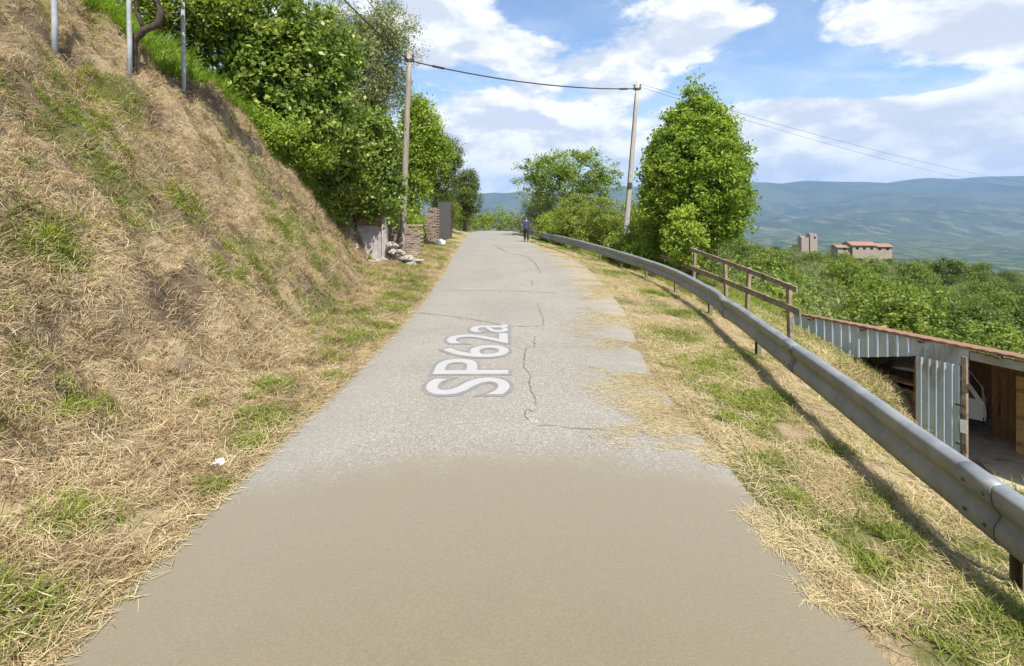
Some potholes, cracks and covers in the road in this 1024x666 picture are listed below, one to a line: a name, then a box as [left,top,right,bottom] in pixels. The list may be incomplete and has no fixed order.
crack [424,303,601,430]
